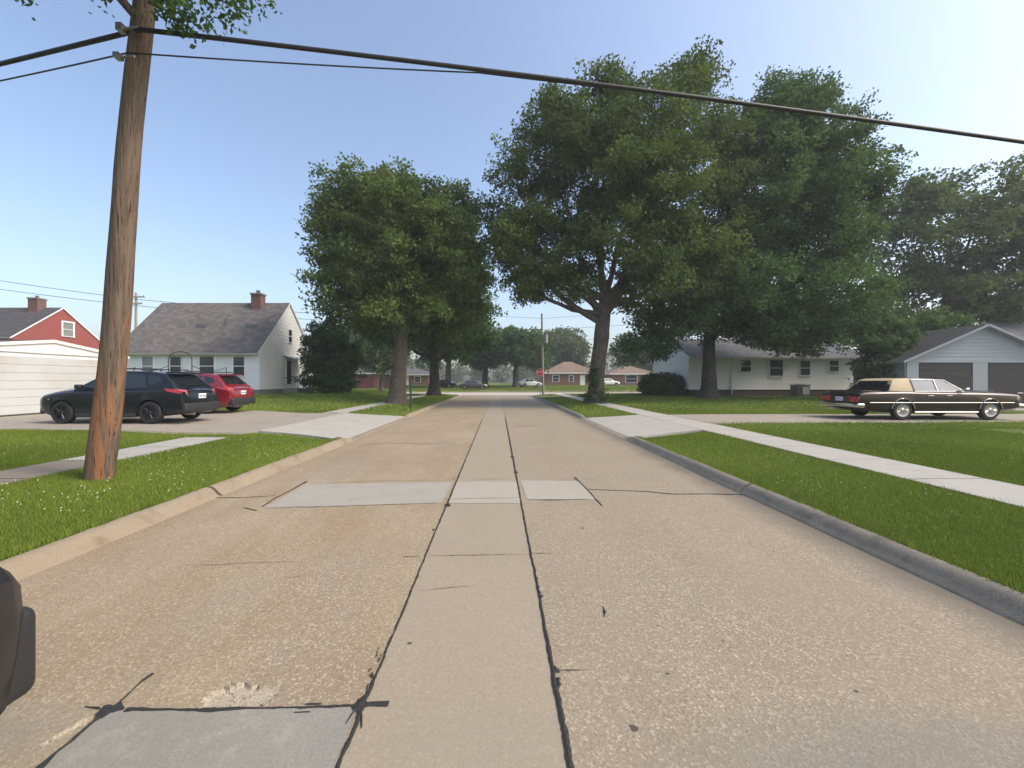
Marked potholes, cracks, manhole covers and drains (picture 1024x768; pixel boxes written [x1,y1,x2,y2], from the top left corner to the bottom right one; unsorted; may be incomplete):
pothole [201,682,284,706]
crack [179,561,307,578]
crack [216,480,444,510]
crack [533,477,743,505]
